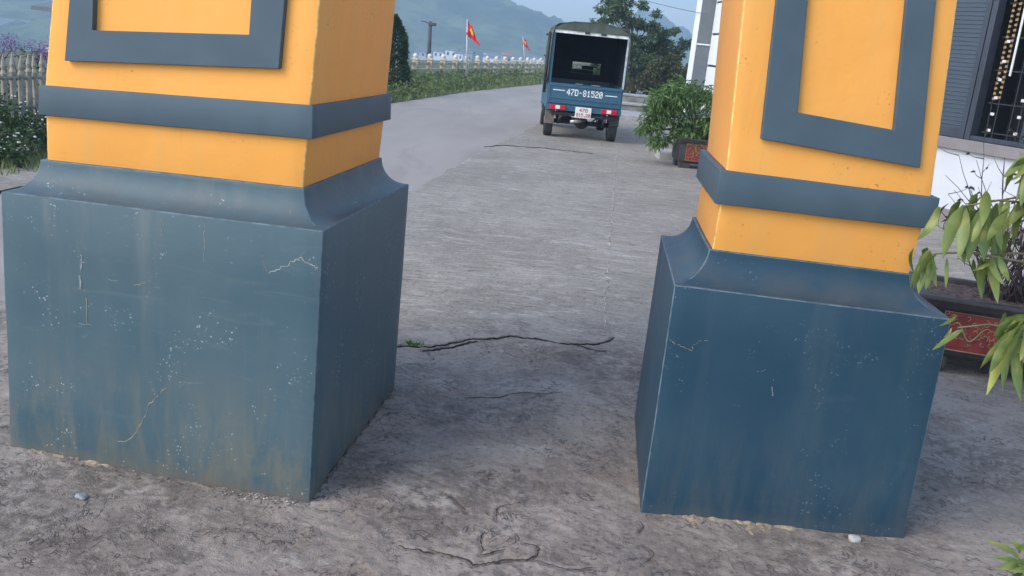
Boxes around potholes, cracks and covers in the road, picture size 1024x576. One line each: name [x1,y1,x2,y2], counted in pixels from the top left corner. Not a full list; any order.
crack [397,335,614,352]
crack [399,503,597,570]
crack [486,145,593,154]
